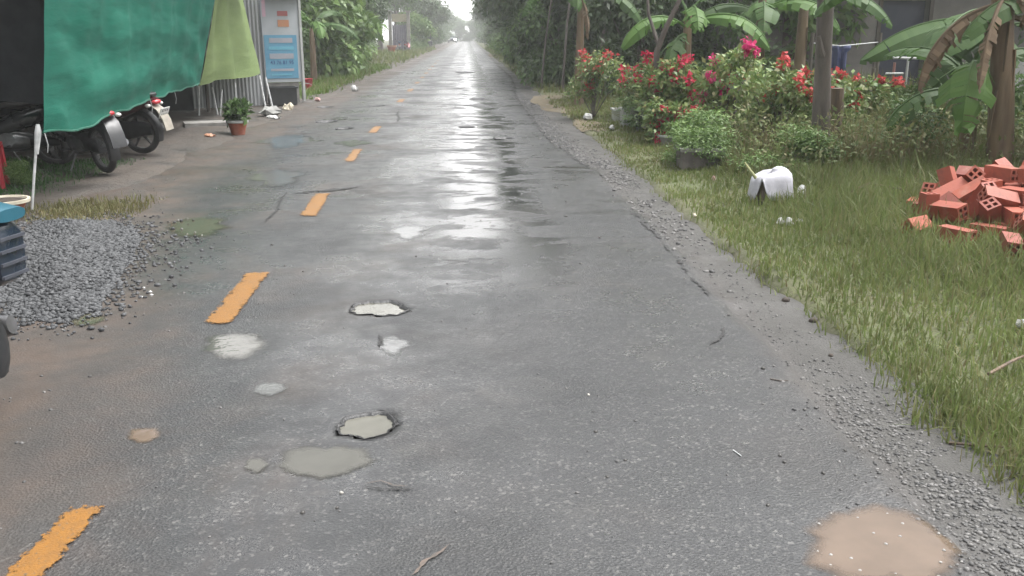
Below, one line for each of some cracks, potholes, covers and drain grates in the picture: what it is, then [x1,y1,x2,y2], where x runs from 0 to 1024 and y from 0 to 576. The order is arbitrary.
pothole [335,410,399,439]
pothole [349,300,410,317]
crack [264,186,358,222]
crack [635,212,709,295]
